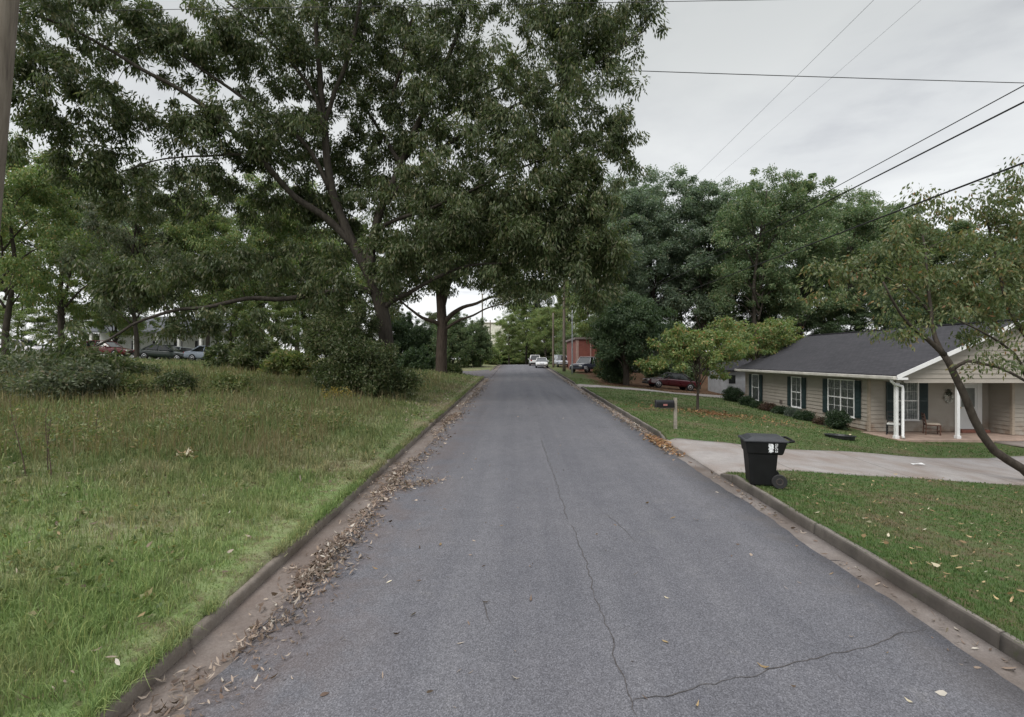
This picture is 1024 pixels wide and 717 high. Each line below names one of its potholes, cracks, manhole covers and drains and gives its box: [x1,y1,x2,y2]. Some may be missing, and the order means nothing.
crack [541,441,926,717]
